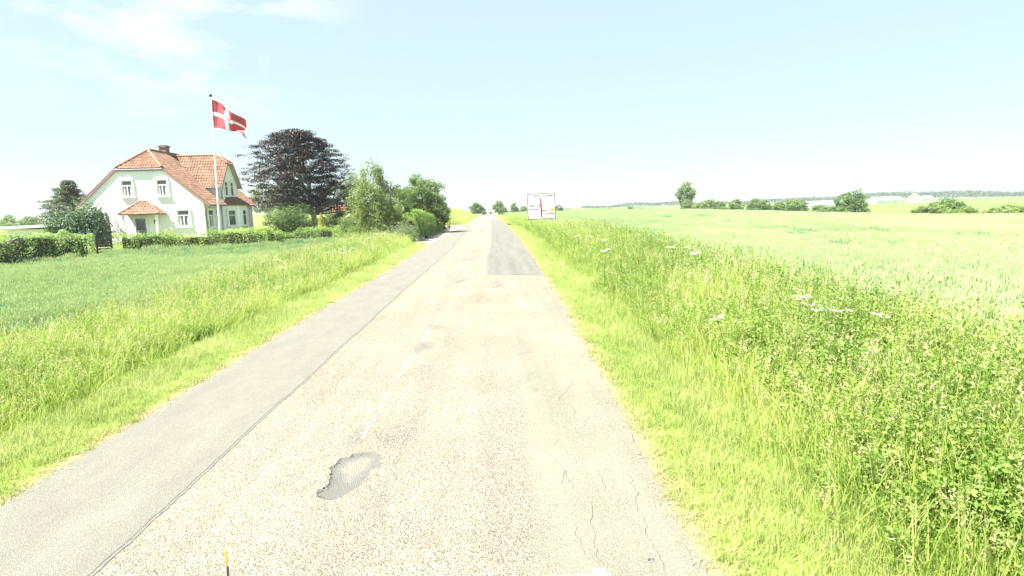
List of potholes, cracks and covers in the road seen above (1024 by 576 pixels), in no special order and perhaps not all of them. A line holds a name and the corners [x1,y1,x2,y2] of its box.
crack [575,471,606,565]
pothole [314,450,382,500]
crack [630,477,664,567]
